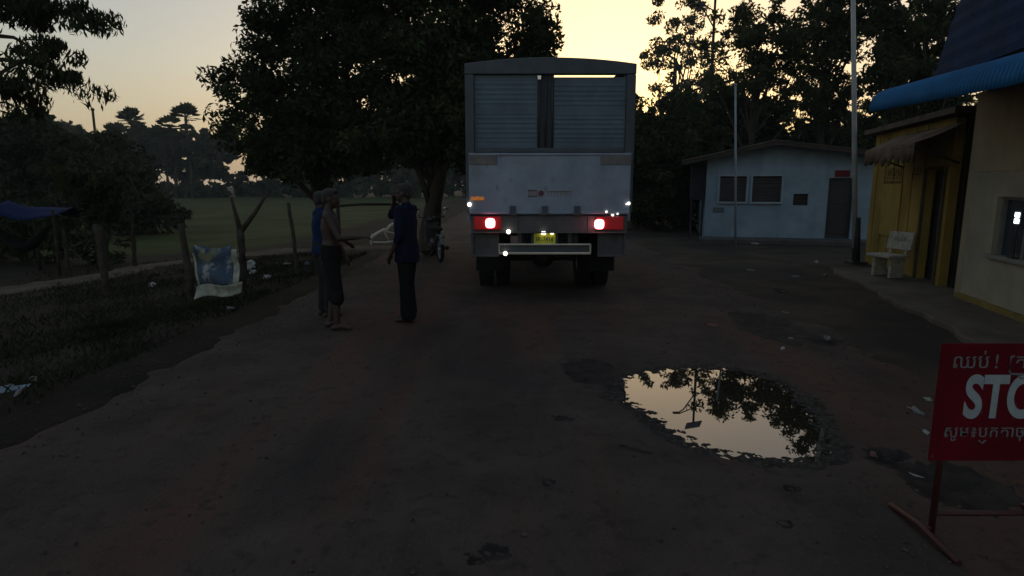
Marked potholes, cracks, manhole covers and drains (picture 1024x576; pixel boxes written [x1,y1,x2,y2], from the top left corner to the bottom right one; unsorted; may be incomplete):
pothole [599,363,856,471]
pothole [477,543,513,561]
pothole [863,446,915,469]
